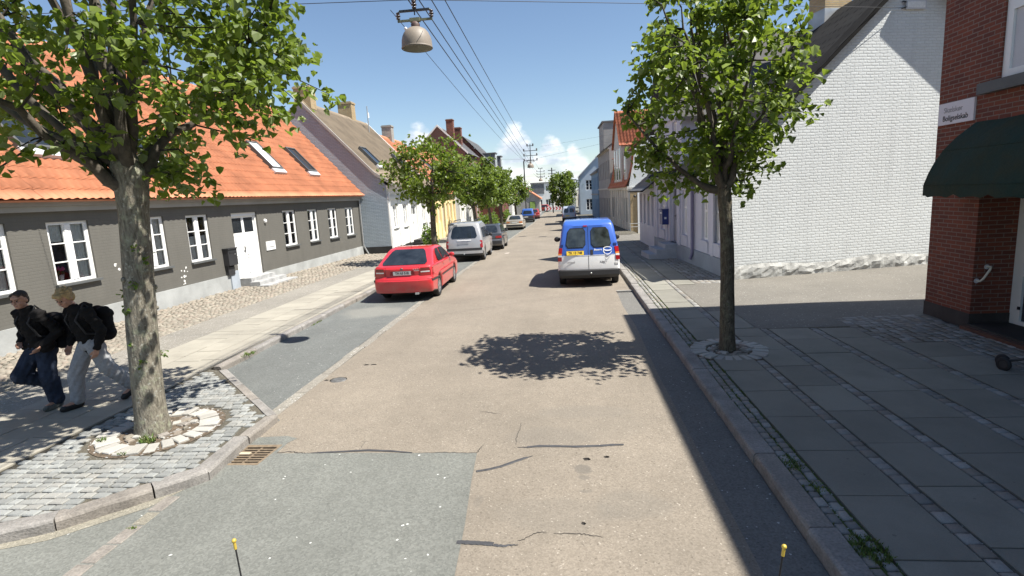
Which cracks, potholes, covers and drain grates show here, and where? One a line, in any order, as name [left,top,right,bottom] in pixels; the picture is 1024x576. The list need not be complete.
drain grate [228,445,282,465]
